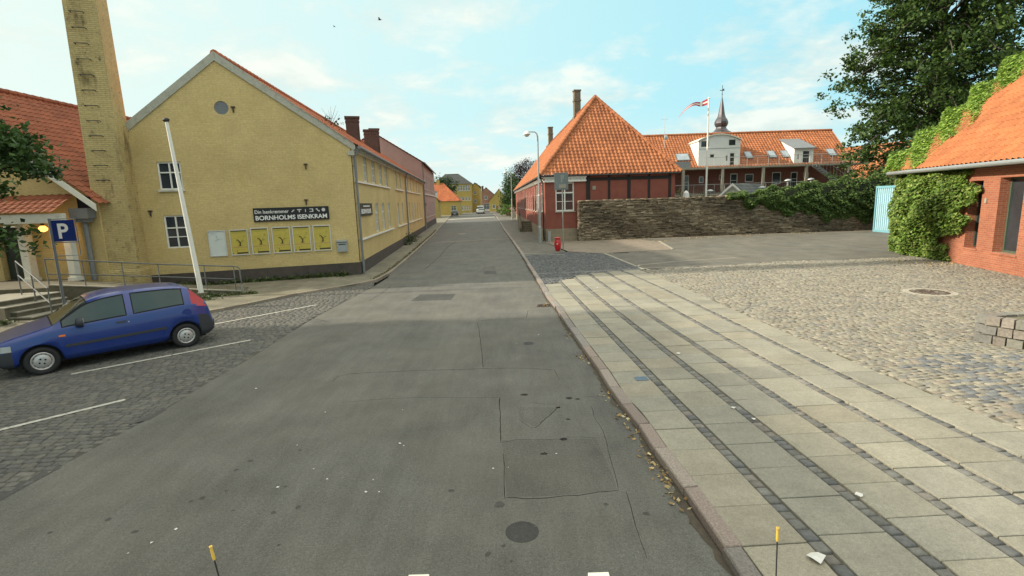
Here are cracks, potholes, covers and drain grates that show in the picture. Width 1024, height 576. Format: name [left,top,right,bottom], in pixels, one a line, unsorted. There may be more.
manhole cover [505,521,539,543]
manhole cover [902,288,959,296]
crack [499,398,647,558]
